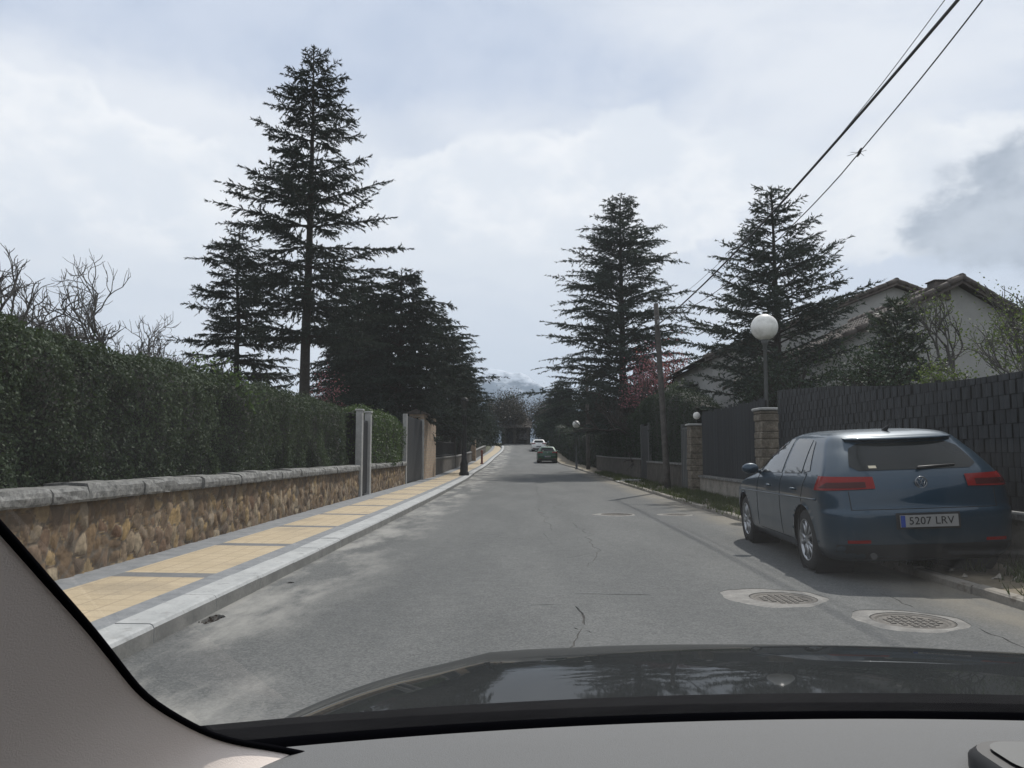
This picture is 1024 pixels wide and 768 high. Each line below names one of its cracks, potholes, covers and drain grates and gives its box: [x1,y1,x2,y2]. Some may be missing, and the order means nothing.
pothole [198,614,225,624]
manhole cover [720,589,829,608]
crack [570,593,643,648]
manhole cover [851,610,971,633]
